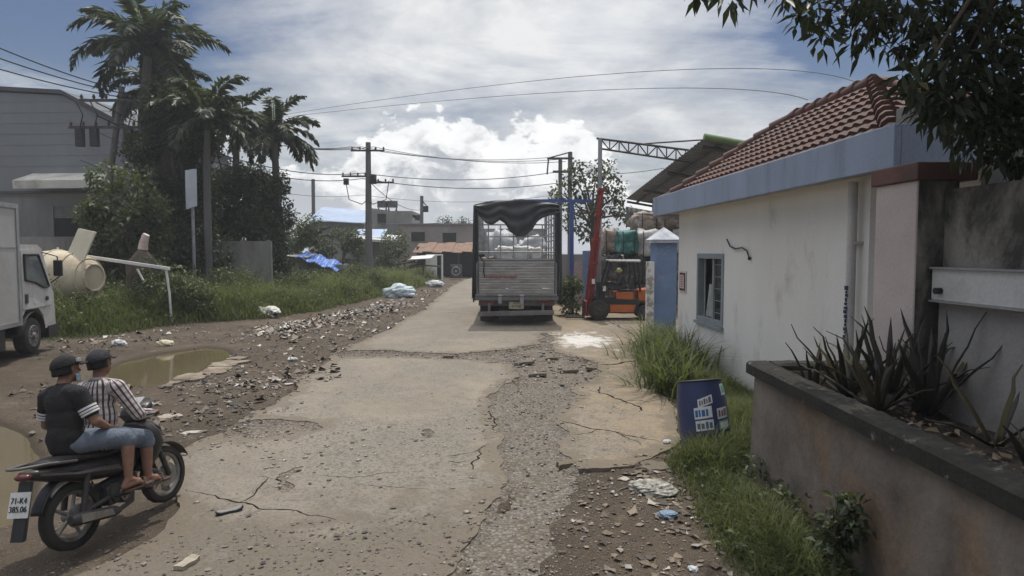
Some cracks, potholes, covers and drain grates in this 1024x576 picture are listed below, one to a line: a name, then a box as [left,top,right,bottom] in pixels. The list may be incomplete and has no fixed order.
pothole [511,333,602,388]
pothole [276,467,303,483]
crack [451,411,499,470]
crack [186,476,332,519]
pothole [225,419,323,439]
crack [567,422,657,442]
pothole [449,382,580,576]
crack [576,387,649,412]
